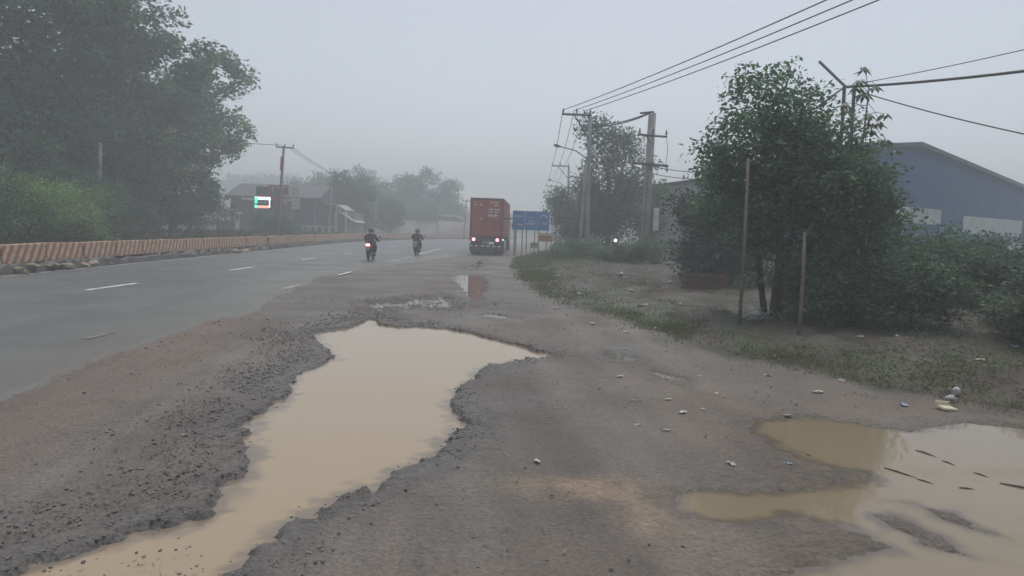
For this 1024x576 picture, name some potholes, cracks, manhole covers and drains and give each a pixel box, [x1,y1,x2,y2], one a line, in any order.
pothole [0,316,573,576]
pothole [433,273,500,304]
pothole [345,291,513,316]
pothole [632,407,1024,576]
